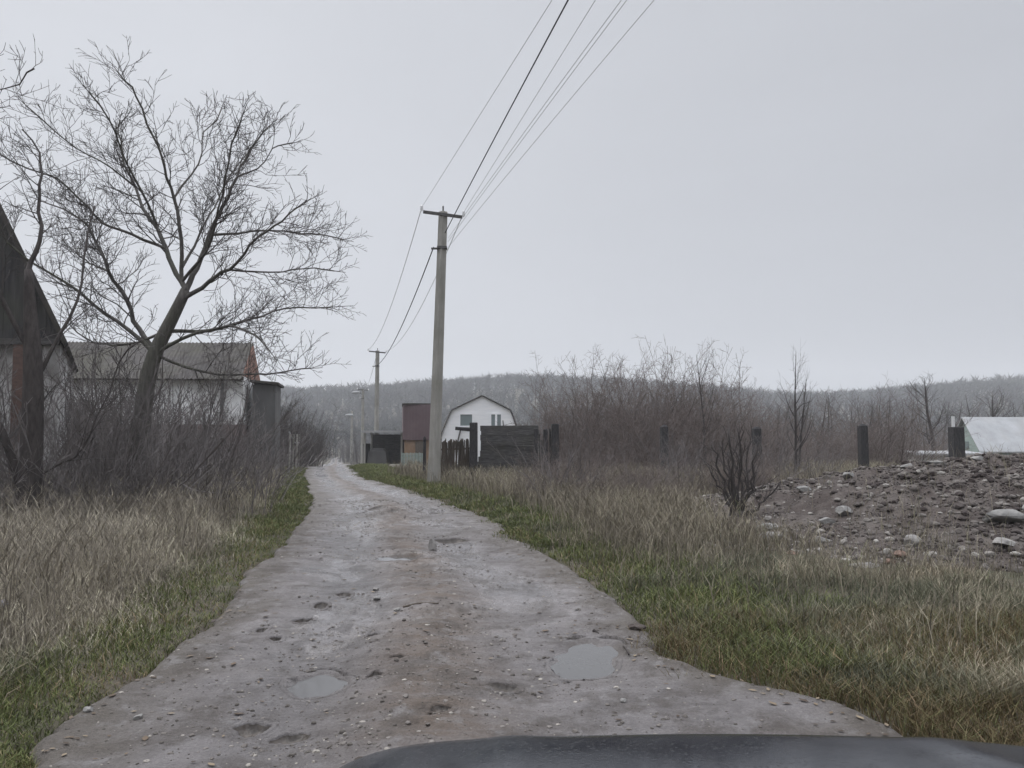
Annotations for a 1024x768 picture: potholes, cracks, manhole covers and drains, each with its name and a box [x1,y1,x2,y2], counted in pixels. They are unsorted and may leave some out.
pothole [370,553,432,562]
pothole [226,719,279,740]
pothole [310,601,332,610]
pothole [260,730,319,747]
pothole [279,670,358,700]
pothole [479,680,525,695]
pothole [545,637,632,684]
